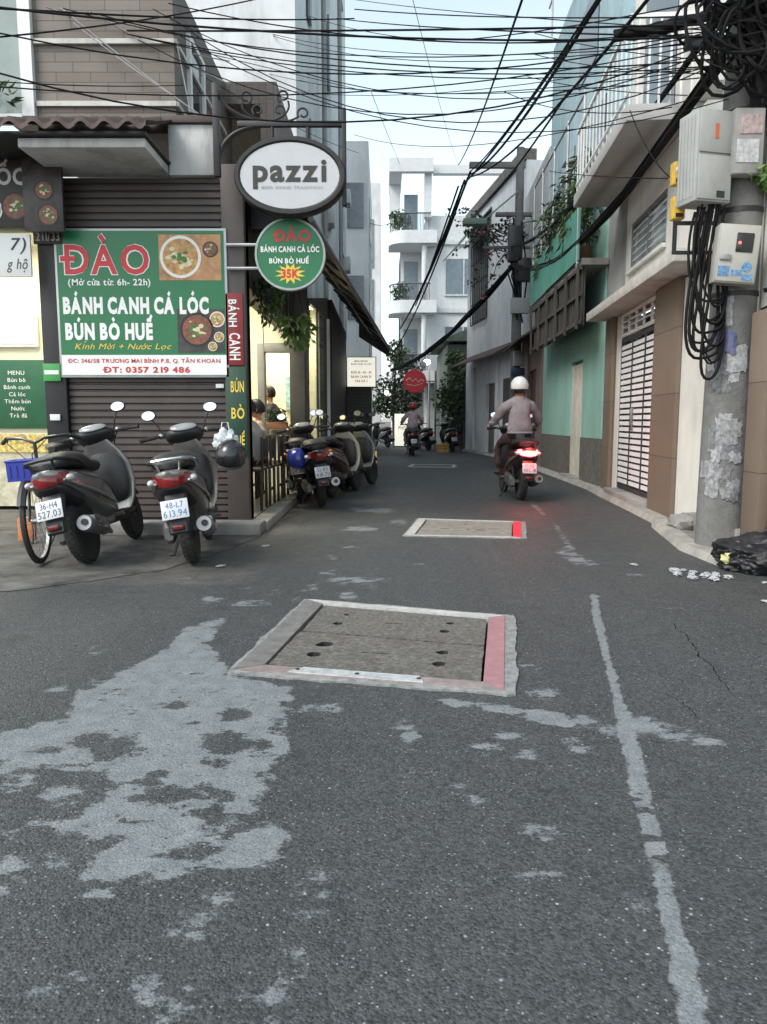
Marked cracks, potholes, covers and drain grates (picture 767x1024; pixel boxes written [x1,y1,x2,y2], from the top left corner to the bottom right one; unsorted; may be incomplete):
crack [674,623,732,694]
manhole cover [402,518,527,539]
manhole cover [227,599,519,697]
